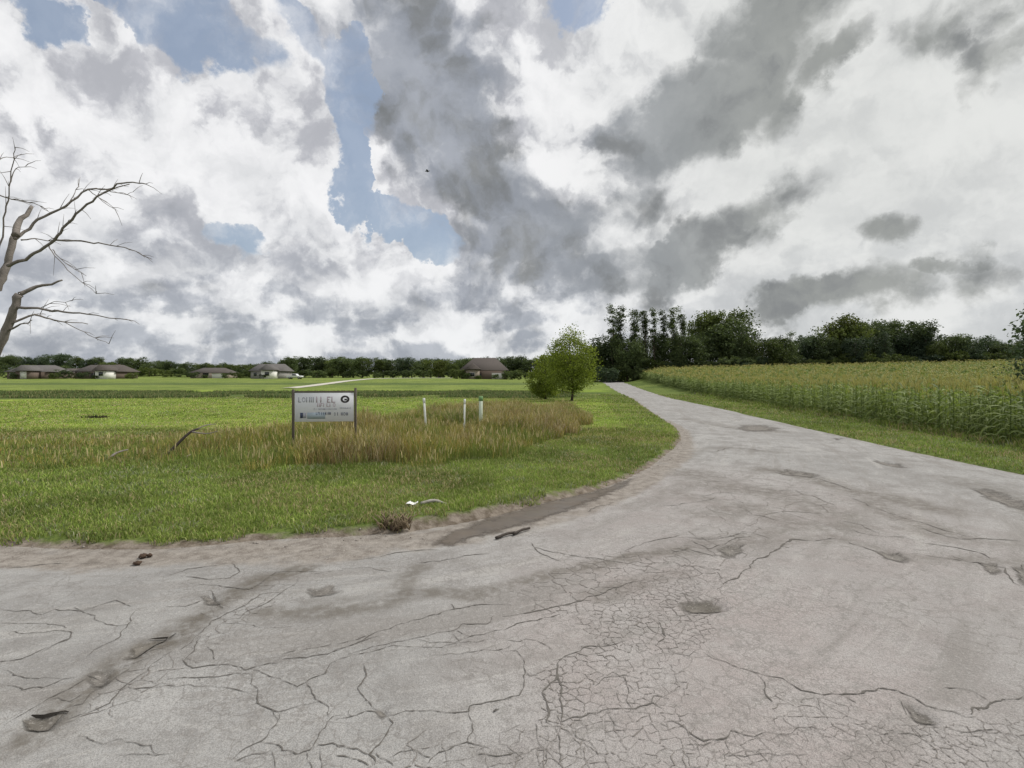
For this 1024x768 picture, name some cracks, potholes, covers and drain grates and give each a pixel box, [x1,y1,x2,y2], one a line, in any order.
pothole [904,705,935,724]
pothole [718,545,744,558]
pothole [976,489,1024,509]
pothole [979,563,1001,574]
pothole [89,671,110,687]
pothole [23,710,69,731]
crack [8,472,1024,768]
pothole [777,470,816,478]
pothole [128,633,176,658]
pothole [308,585,337,596]
pothole [878,552,908,562]
pothole [681,601,722,613]
